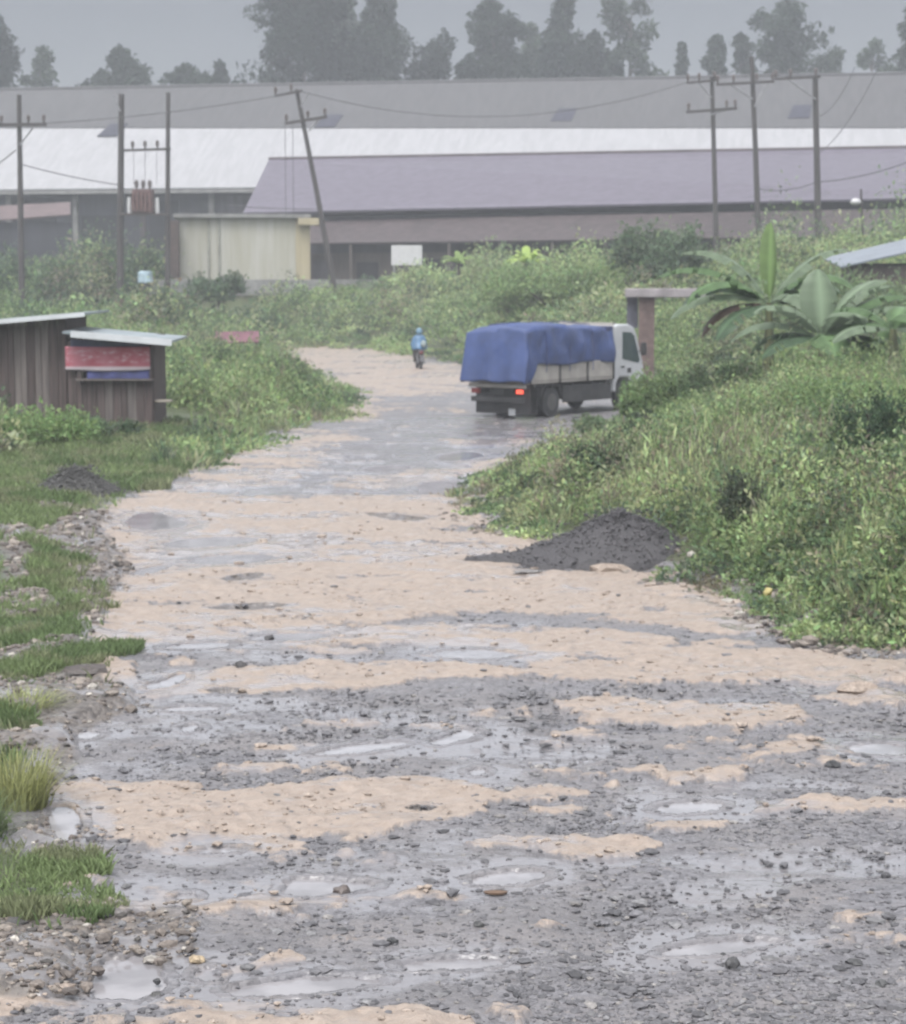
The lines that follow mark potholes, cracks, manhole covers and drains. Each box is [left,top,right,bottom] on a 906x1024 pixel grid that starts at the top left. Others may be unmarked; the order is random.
pothole [112,510,200,531]
pothole [39,799,94,843]
pothole [425,450,498,463]
pothole [75,947,181,1005]
pothole [218,571,272,582]
